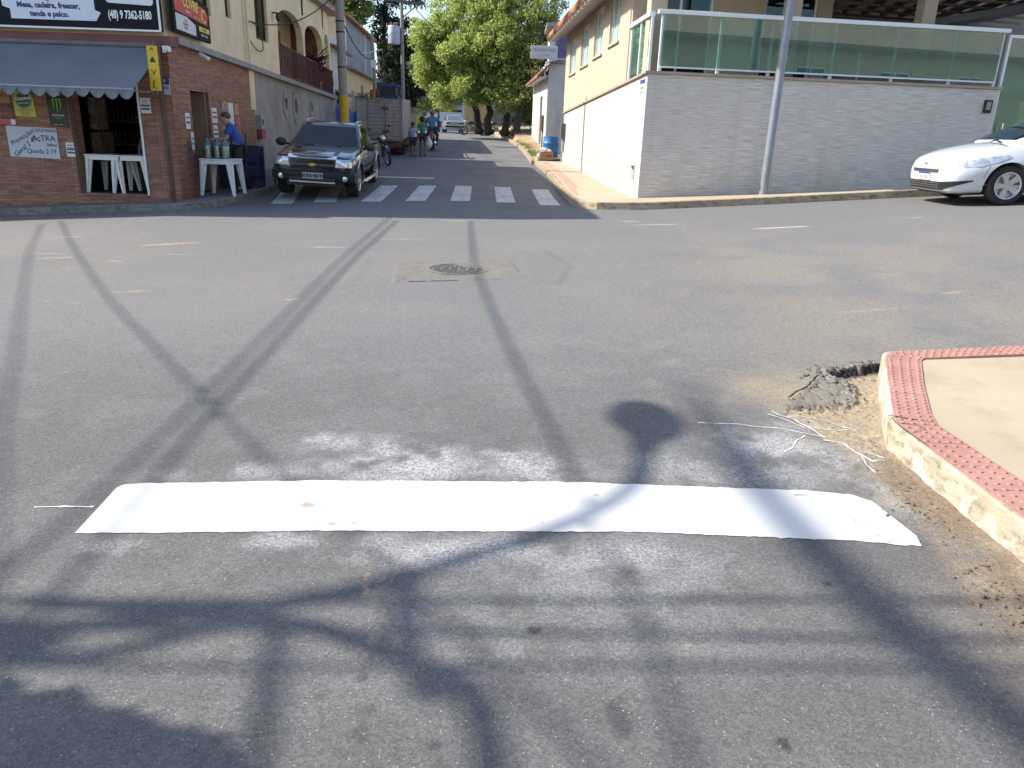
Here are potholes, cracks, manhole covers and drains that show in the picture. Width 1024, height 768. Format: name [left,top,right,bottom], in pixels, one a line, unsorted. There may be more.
pothole [784,360,898,460]
manhole cover [390,259,528,283]
